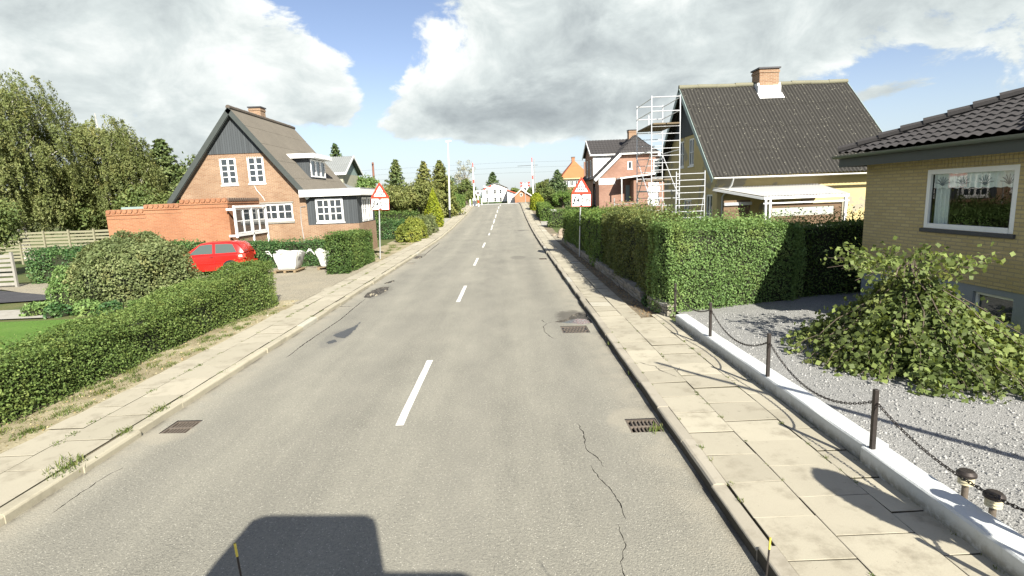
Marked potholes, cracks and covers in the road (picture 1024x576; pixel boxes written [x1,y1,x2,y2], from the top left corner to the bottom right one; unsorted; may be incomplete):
drain grate [625,418,663,433]
drain grate [159,420,203,434]
crack [580,426,626,576]
